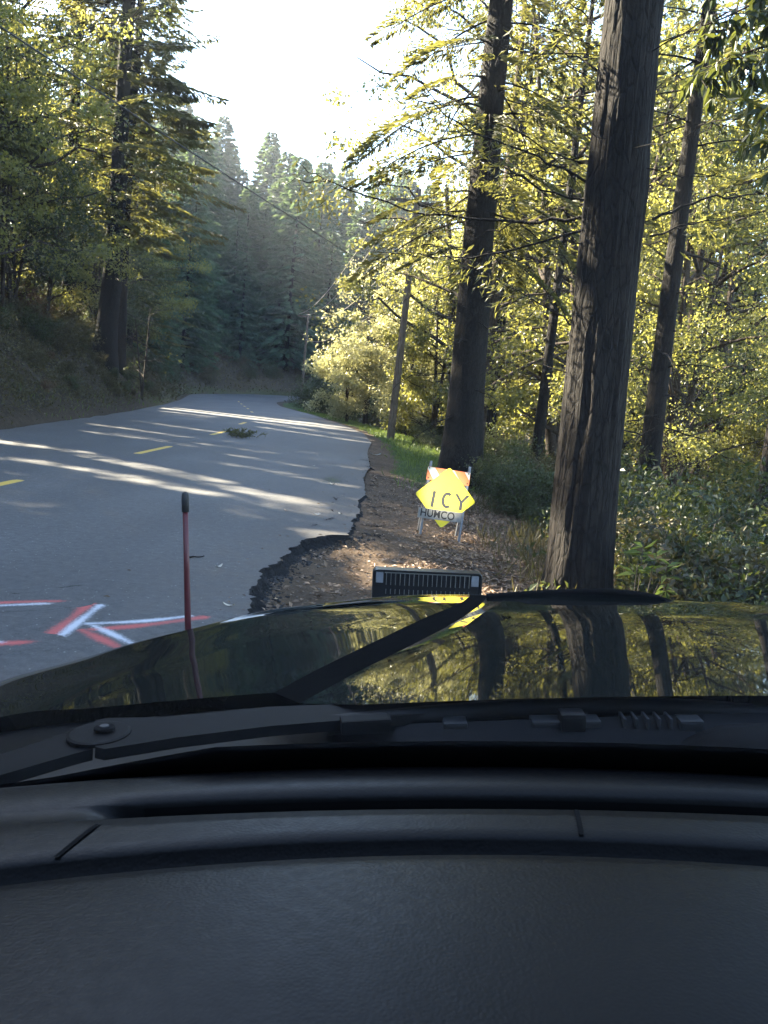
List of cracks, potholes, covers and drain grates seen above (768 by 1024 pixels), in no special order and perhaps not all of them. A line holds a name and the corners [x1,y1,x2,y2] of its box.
pothole [247,494,368,615]
